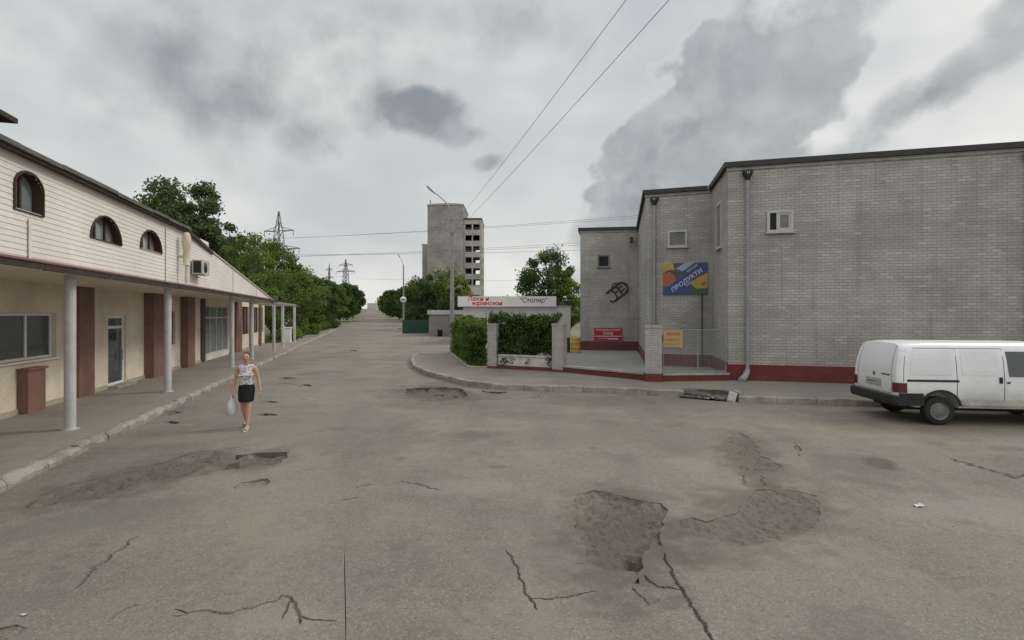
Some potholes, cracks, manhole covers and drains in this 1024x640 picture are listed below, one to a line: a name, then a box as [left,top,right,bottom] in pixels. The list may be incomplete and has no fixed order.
crack [75,536,141,623]
pothole [726,432,782,474]
pothole [221,452,288,470]
crack [401,480,439,490]
crack [505,549,596,610]
pothole [406,387,468,399]
crack [175,595,335,625]
crack [950,458,1024,479]
pothole [573,490,668,584]
crack [632,552,714,640]
pothole [678,489,821,548]
pothole [26,451,224,510]
